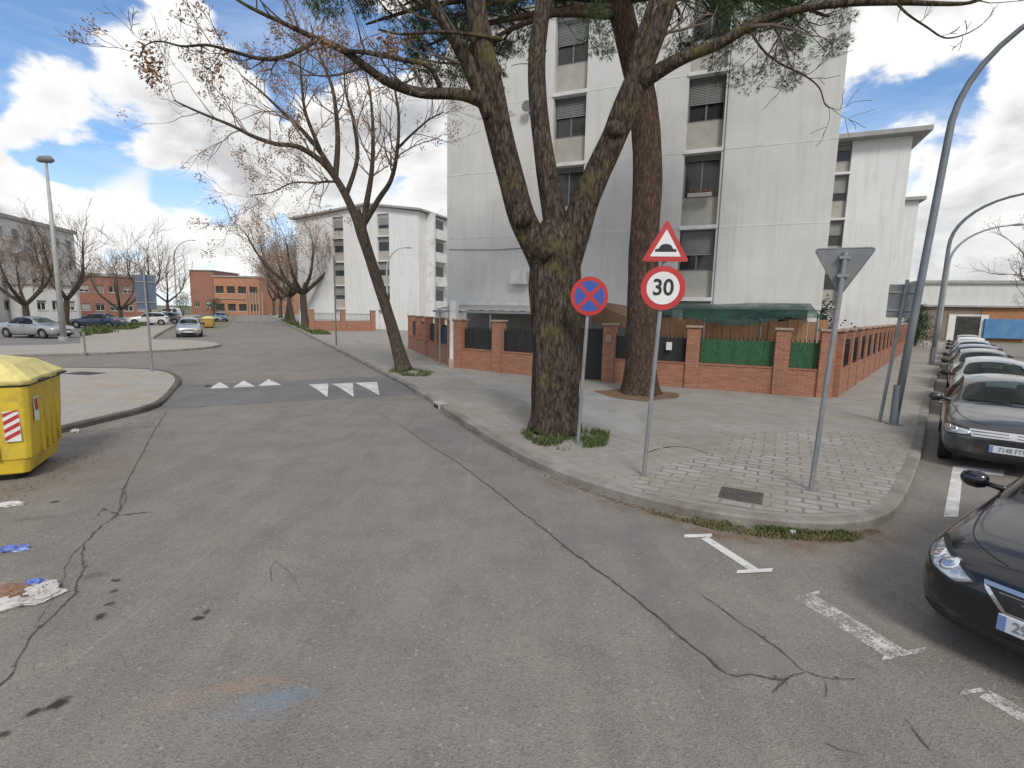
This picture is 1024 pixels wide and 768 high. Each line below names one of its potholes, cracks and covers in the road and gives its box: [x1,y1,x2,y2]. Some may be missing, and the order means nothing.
crack [369,407,857,698]
crack [0,412,166,685]
manhole cover [718,486,764,505]
